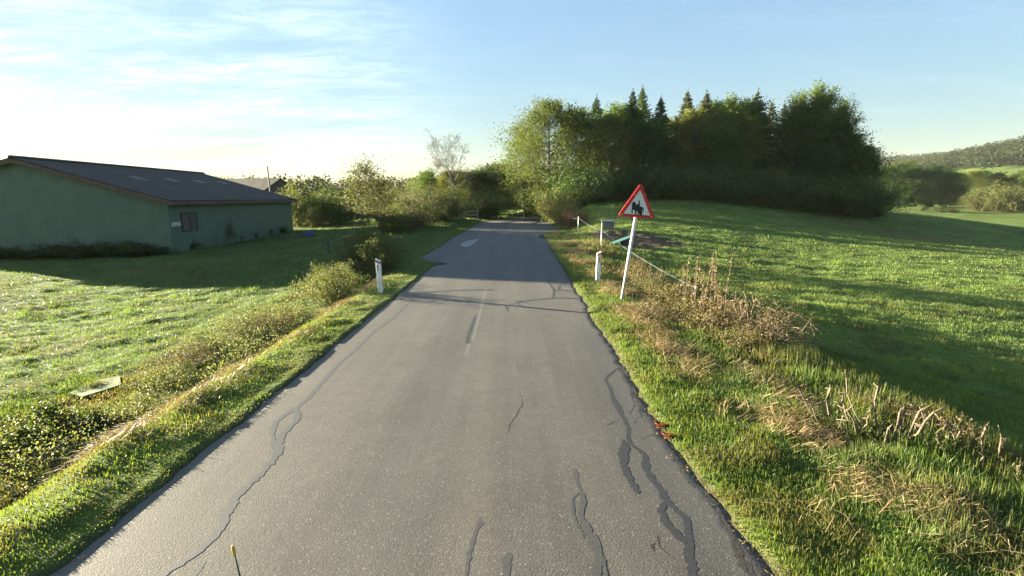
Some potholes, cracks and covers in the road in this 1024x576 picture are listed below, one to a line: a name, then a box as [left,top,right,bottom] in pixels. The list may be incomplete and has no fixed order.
crack [607,367,659,440]
